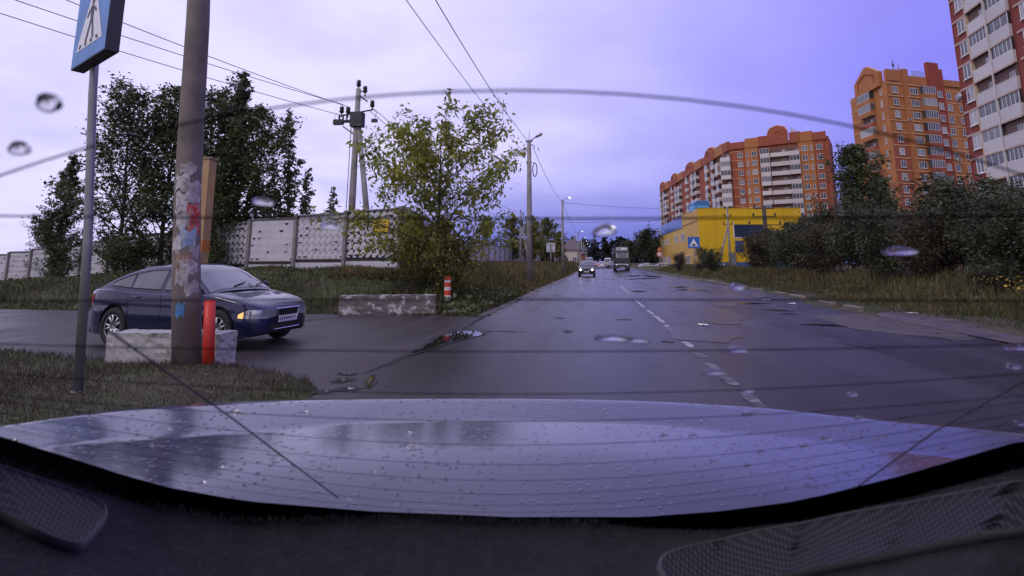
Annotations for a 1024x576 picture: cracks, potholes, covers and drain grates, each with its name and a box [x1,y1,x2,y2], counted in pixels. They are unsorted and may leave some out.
pothole [363,373,378,390]
pothole [407,330,487,356]
